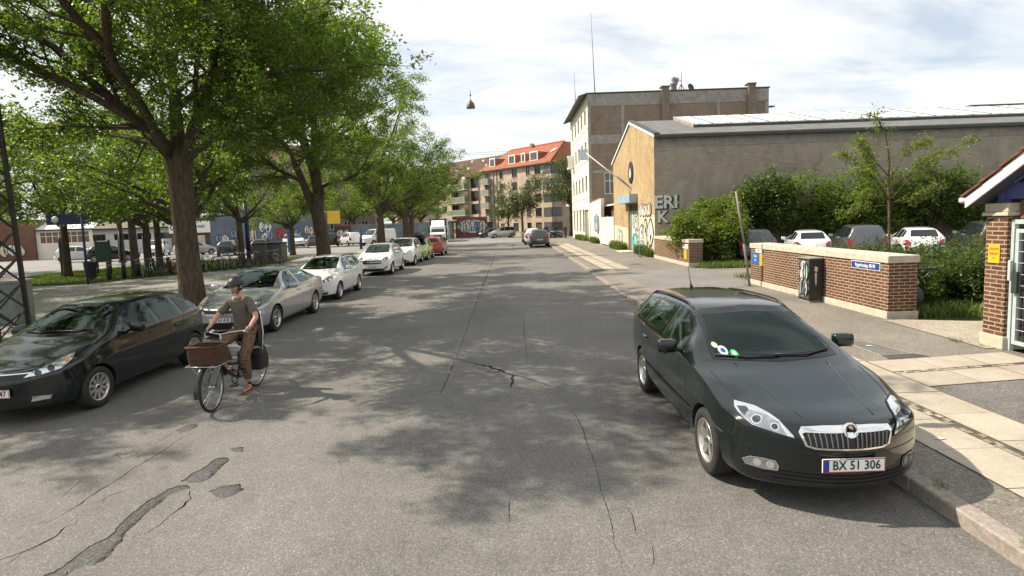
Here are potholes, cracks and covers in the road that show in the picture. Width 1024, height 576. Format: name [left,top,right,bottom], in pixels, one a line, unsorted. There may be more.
pothole [44,485,190,576]
crack [1,427,201,564]
pothole [180,457,229,483]
crack [567,401,655,576]
pothole [175,423,198,433]
crack [459,314,568,392]
pothole [208,484,245,498]
